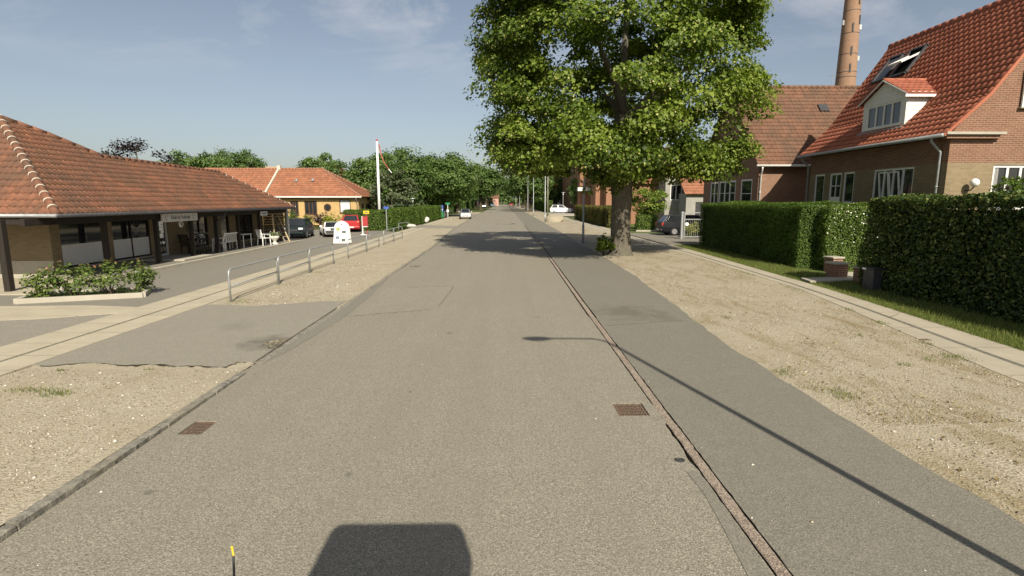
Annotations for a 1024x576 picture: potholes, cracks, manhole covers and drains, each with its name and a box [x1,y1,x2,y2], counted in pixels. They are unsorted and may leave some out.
drain grate [613,404,649,416]
drain grate [179,422,216,435]
